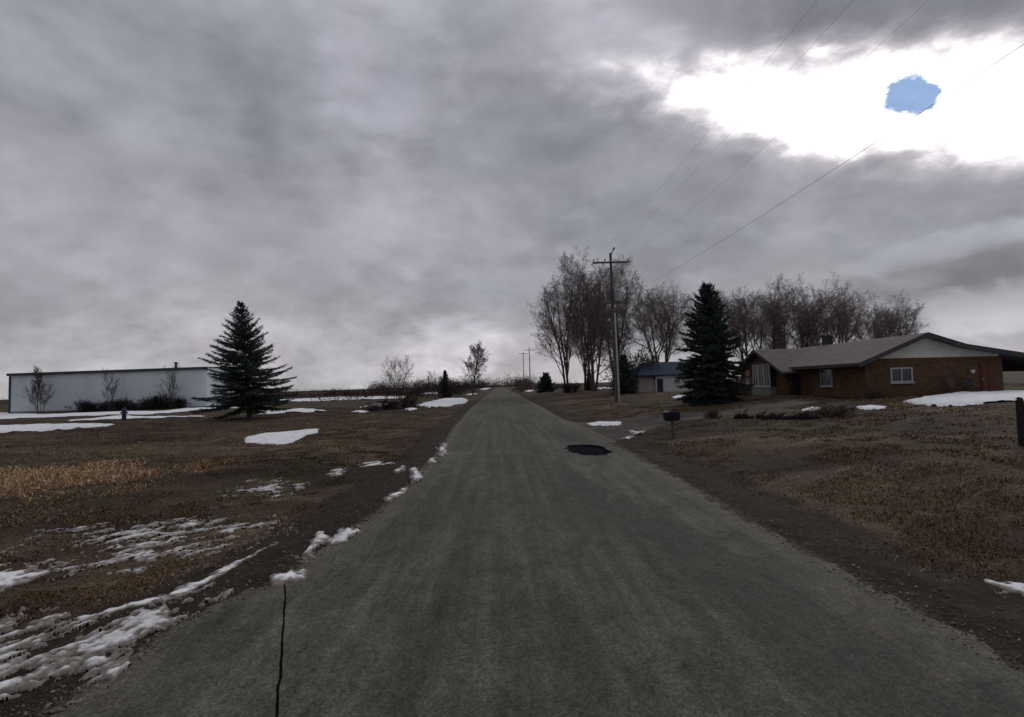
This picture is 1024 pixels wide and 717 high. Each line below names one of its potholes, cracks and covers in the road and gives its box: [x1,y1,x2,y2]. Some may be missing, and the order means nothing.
pothole [564,444,612,456]
crack [275,586,286,717]
